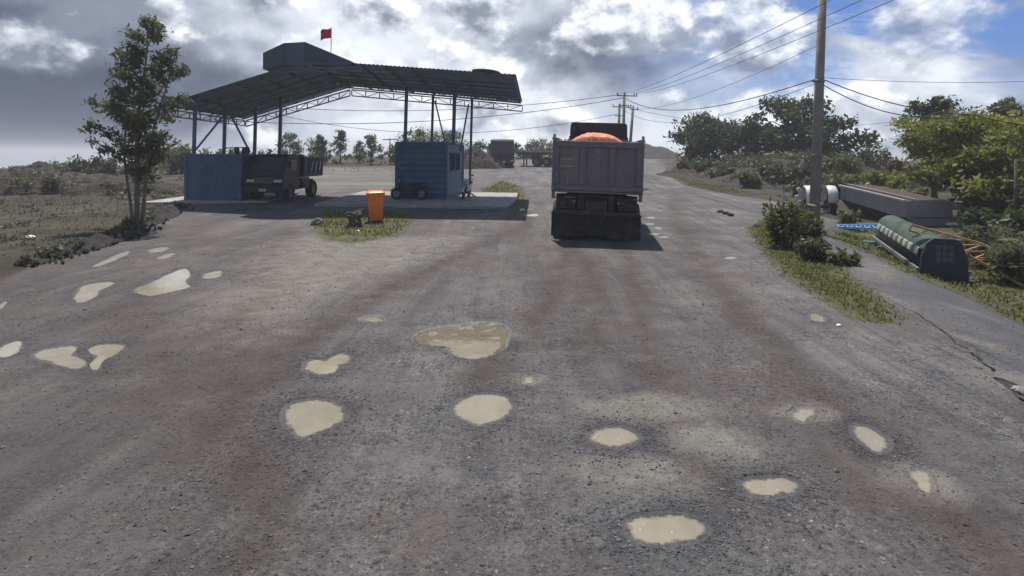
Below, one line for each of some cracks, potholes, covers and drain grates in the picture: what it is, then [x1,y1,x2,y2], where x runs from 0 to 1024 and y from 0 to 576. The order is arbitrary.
pothole [735,472,806,500]
crack [894,303,996,372]
pothole [409,320,512,360]
pothole [200,270,225,279]
pothole [278,396,350,439]
pothole [785,404,821,424]
pothole [72,280,117,303]
pothole [805,312,828,322]
pothole [447,390,518,427]
pothole [30,345,90,370]
pothole [847,422,895,454]
pothole [300,351,354,375]
